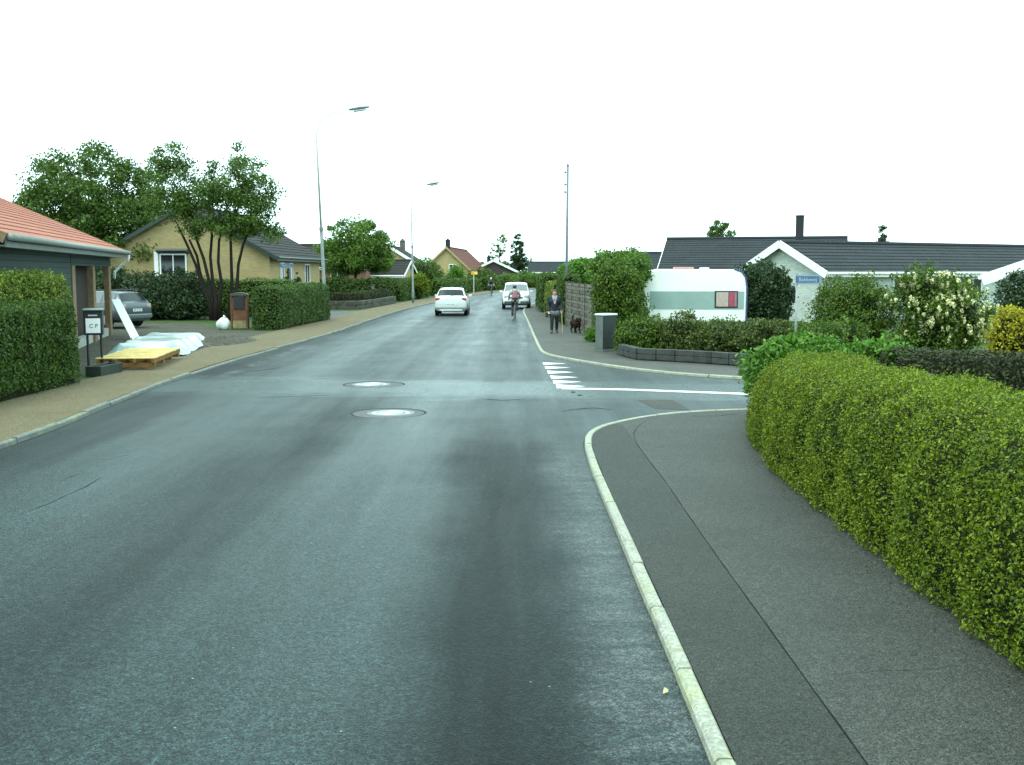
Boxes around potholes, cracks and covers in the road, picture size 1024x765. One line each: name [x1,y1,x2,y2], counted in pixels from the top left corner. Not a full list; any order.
manhole cover [350,408,427,418]
